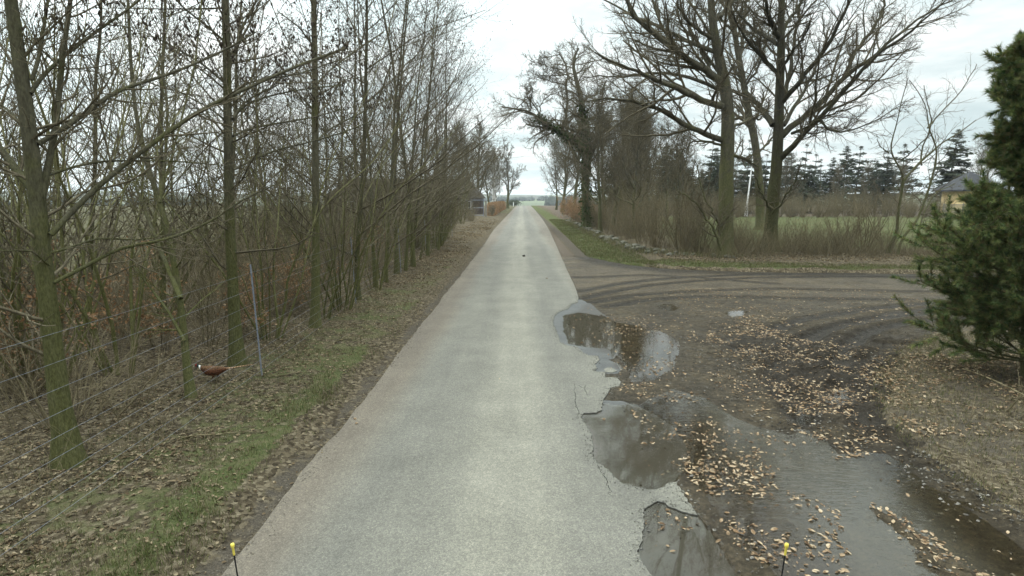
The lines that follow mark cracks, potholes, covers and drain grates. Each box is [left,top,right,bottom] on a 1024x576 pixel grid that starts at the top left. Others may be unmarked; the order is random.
pothole [582,400,687,490]
pothole [594,359,622,374]
pothole [553,300,622,360]
pothole [637,503,735,576]
